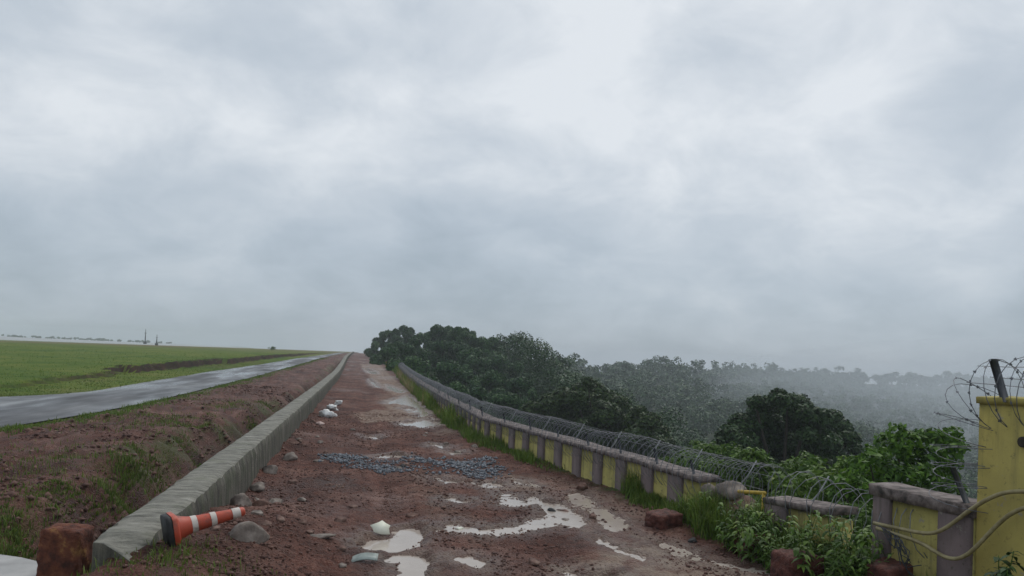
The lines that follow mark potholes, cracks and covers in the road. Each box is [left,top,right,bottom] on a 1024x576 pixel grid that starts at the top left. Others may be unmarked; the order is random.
pothole [438,494,480,503]
pothole [347,520,436,553]
pothole [376,549,445,576]
